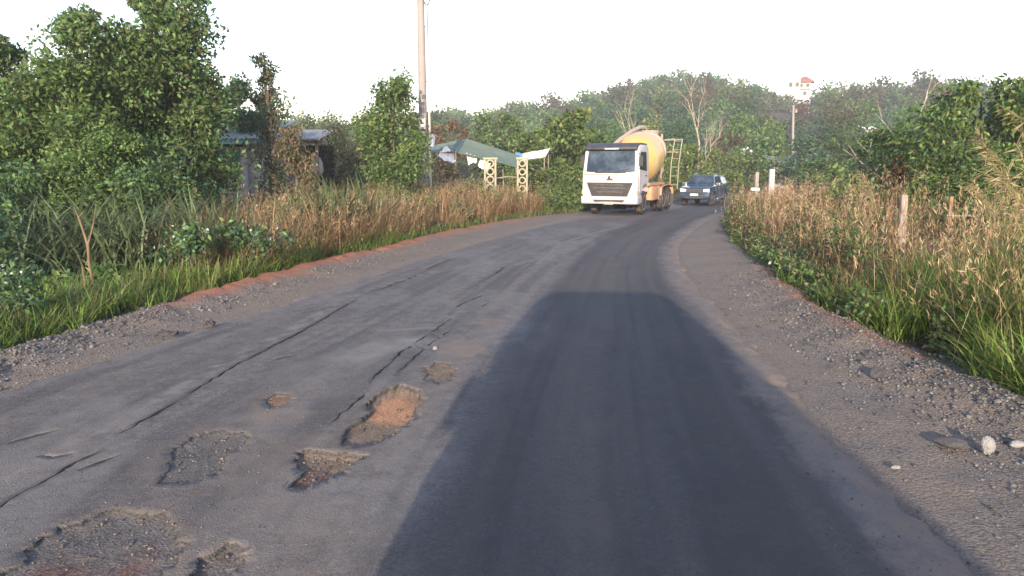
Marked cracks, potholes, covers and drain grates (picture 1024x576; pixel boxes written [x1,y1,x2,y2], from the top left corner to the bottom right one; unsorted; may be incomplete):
pothole [253,390,302,412]
crack [0,259,508,513]
pothole [0,503,214,576]
pothole [333,382,432,452]
pothole [415,359,466,387]
pothole [173,536,262,576]
pothole [149,425,261,491]
pothole [279,445,376,495]
